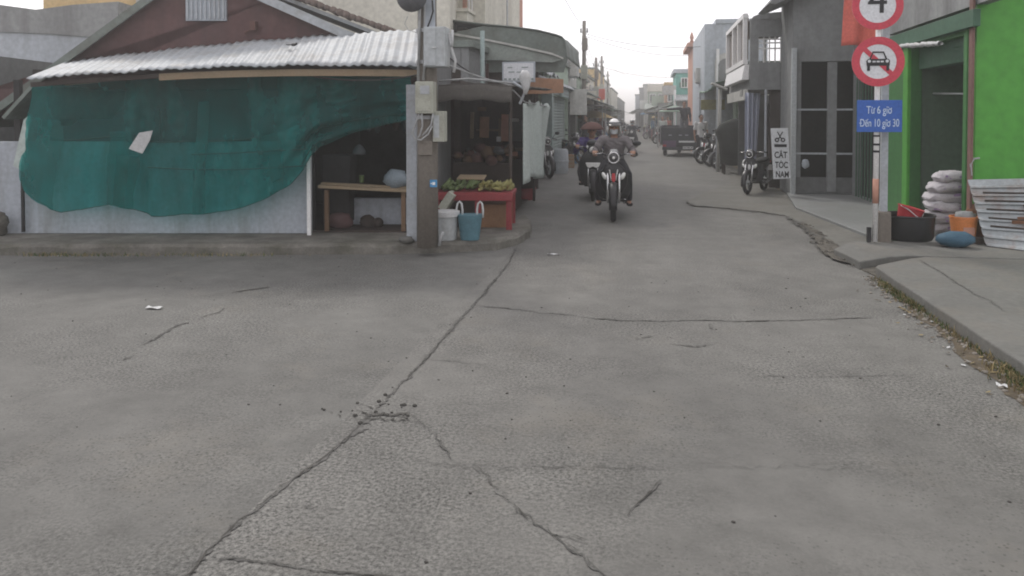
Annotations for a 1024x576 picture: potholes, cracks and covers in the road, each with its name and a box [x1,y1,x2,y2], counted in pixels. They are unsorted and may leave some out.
crack [375,412,904,576]
crack [479,305,871,347]
crack [682,200,818,236]
crack [122,286,270,361]
crack [921,261,1006,312]
crack [208,557,391,576]
